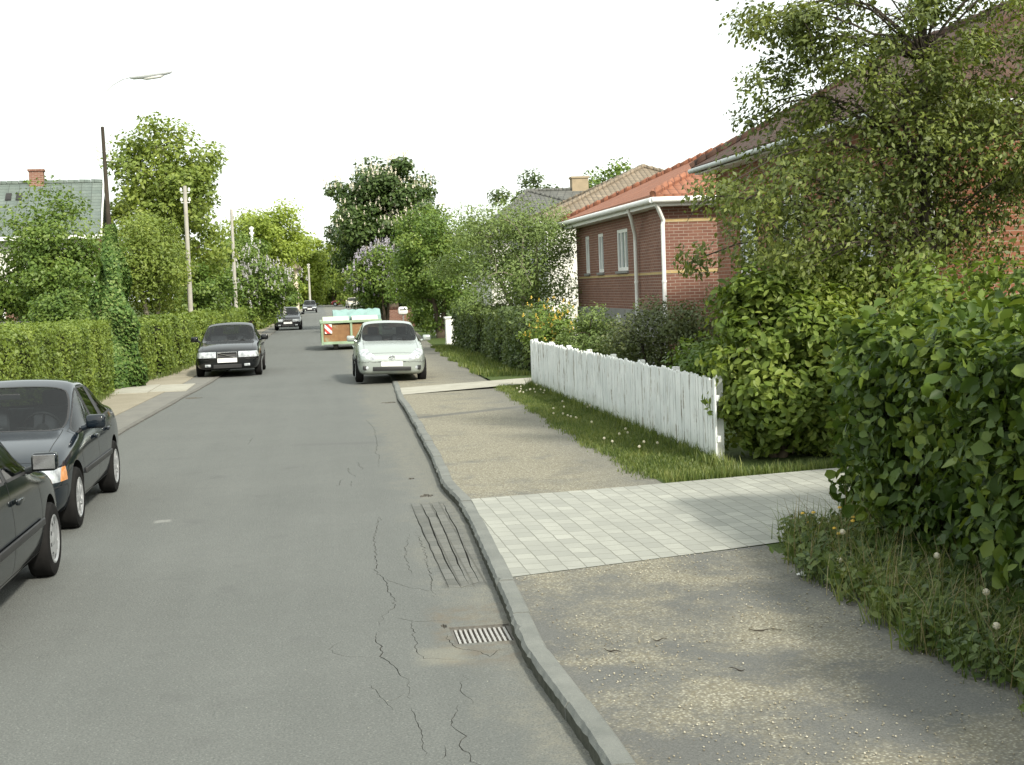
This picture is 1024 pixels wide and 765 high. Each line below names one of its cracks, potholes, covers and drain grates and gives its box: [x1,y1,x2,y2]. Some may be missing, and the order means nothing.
drain grate [449,623,515,644]
crack [373,503,498,659]
crack [331,634,426,756]
